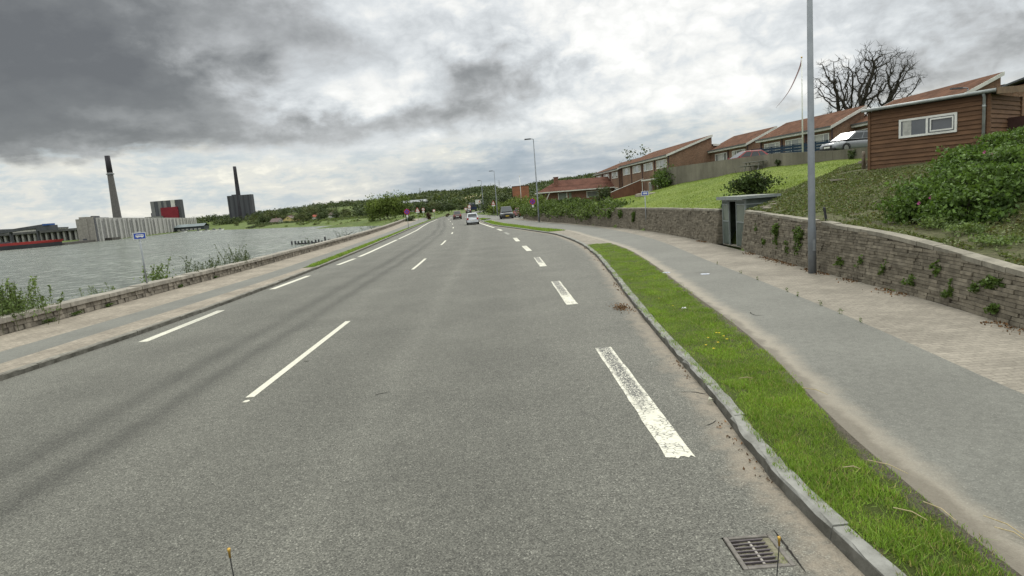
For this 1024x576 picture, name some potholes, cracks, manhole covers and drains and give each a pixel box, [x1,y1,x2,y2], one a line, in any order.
drain grate [723,534,796,570]
